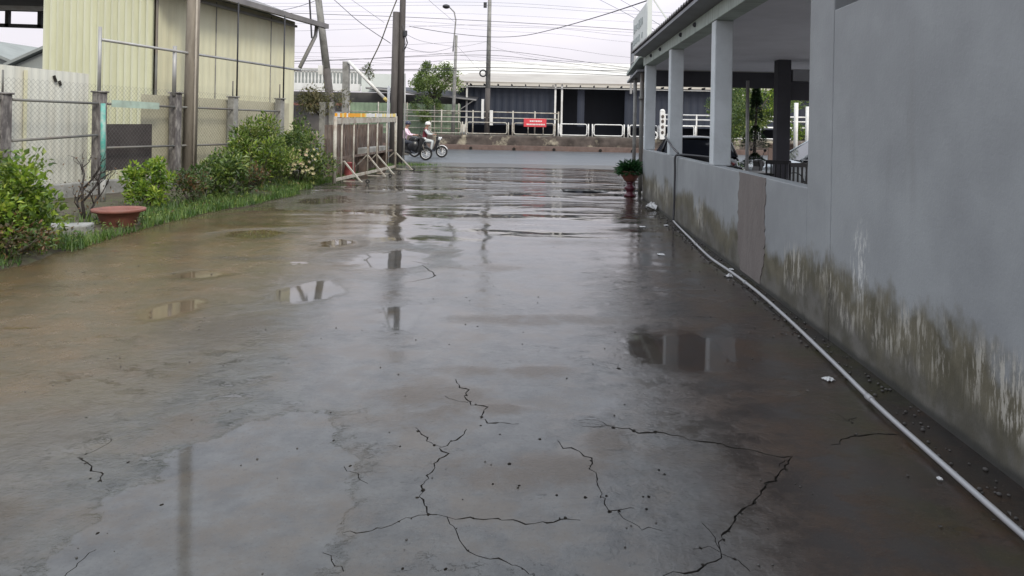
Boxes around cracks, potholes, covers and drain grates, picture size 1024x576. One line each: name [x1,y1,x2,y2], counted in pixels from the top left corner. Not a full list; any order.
crack [343,379,576,574]
crack [558,420,793,576]
crack [77,440,112,482]
crack [832,413,907,445]
